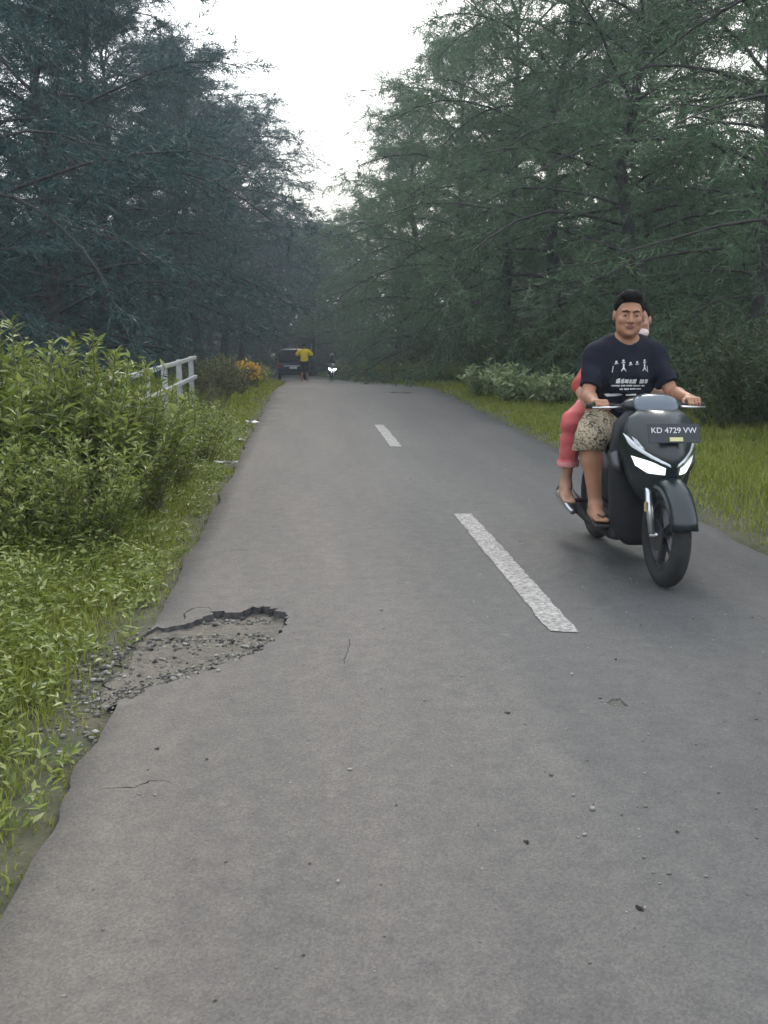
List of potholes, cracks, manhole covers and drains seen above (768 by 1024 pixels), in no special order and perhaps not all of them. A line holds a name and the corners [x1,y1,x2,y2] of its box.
pothole [607,698,628,708]
crack [99,780,171,790]
pothole [100,606,289,707]
